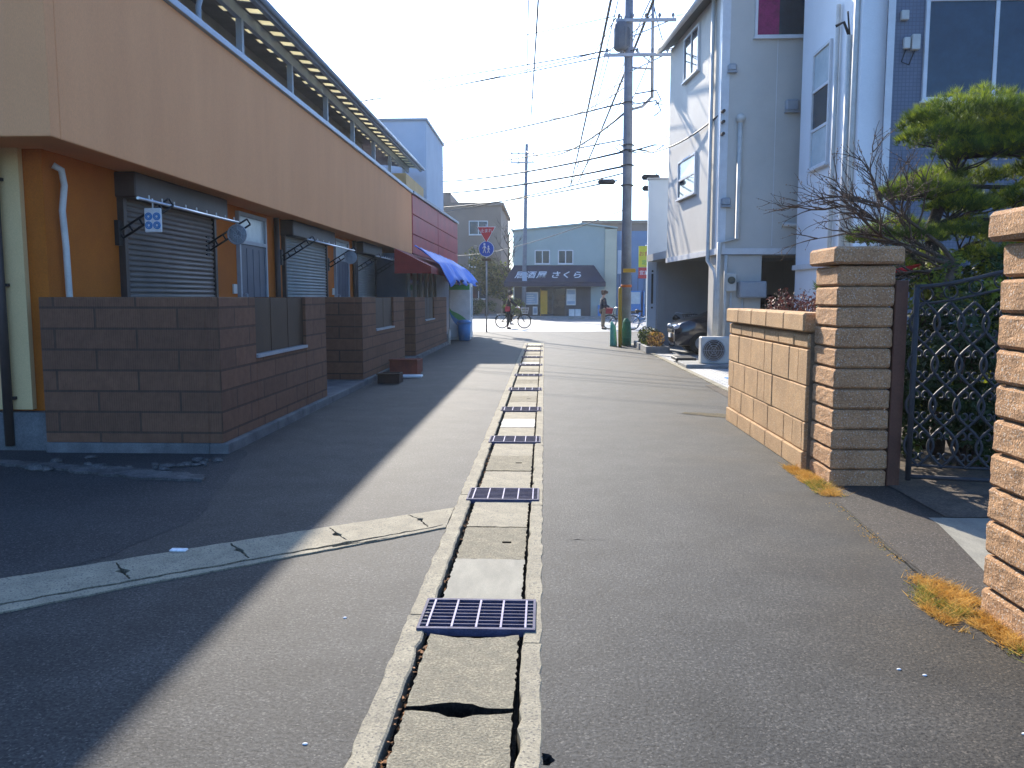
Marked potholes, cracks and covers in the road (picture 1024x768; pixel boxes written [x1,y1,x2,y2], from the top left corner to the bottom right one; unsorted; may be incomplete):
drain grate [416,598,536,637]
drain grate [466,487,539,504]
crack [0,515,441,605]
drain grate [488,436,541,445]
